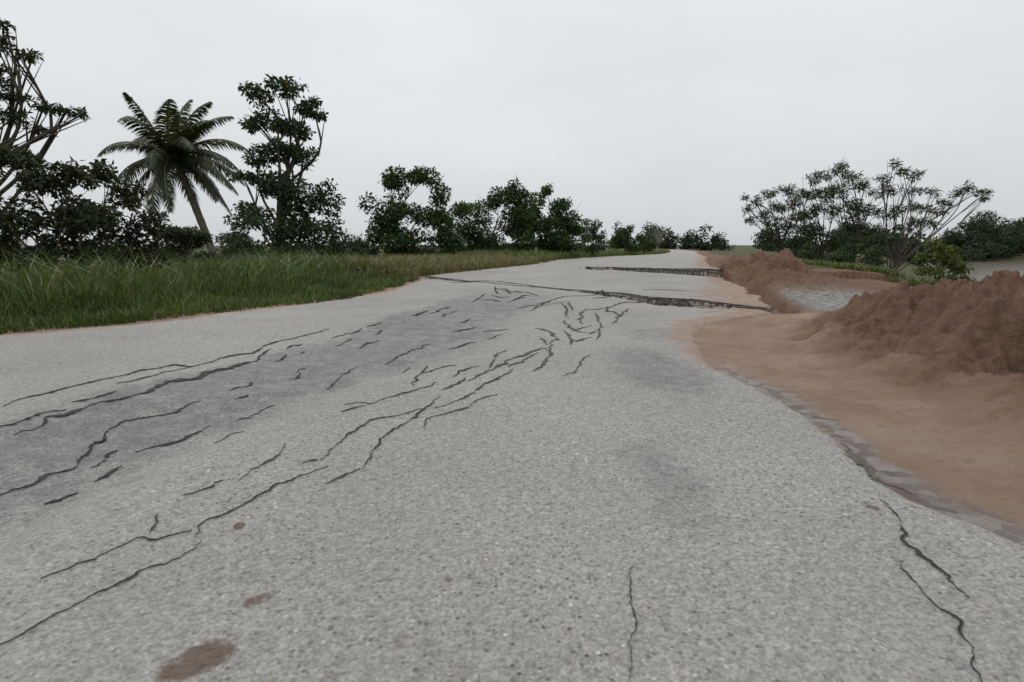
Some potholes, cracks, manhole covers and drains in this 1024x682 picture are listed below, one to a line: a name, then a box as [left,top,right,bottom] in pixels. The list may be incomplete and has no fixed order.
crack [880,499,982,682]
crack [628,565,637,680]
crack [0,266,775,645]
